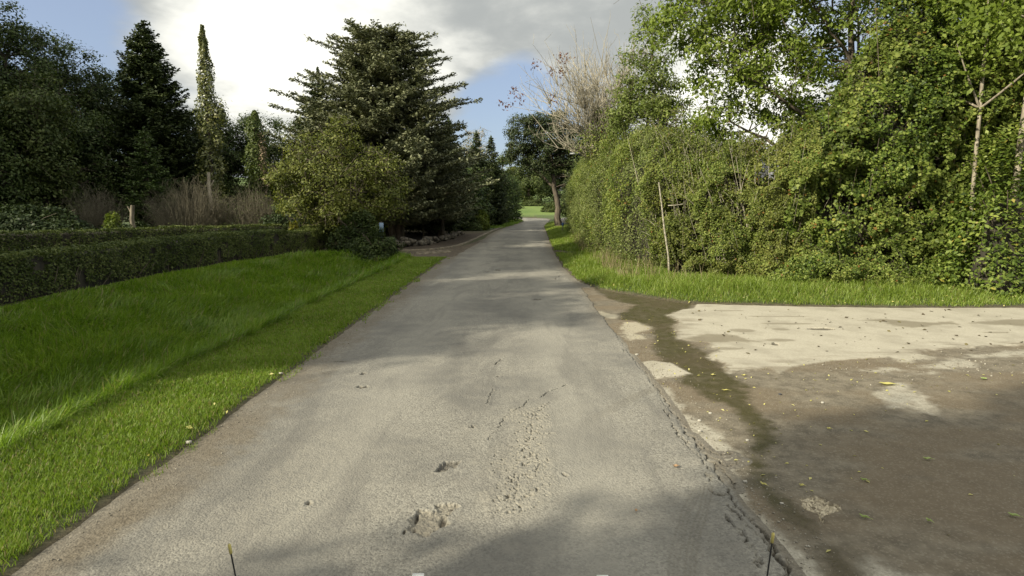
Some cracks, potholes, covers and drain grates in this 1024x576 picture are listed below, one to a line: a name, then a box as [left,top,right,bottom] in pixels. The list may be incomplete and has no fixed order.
crack [492,357,507,366]
pothole [430,458,468,475]
pothole [394,500,465,542]
crack [478,383,572,518]
crack [611,334,806,576]
